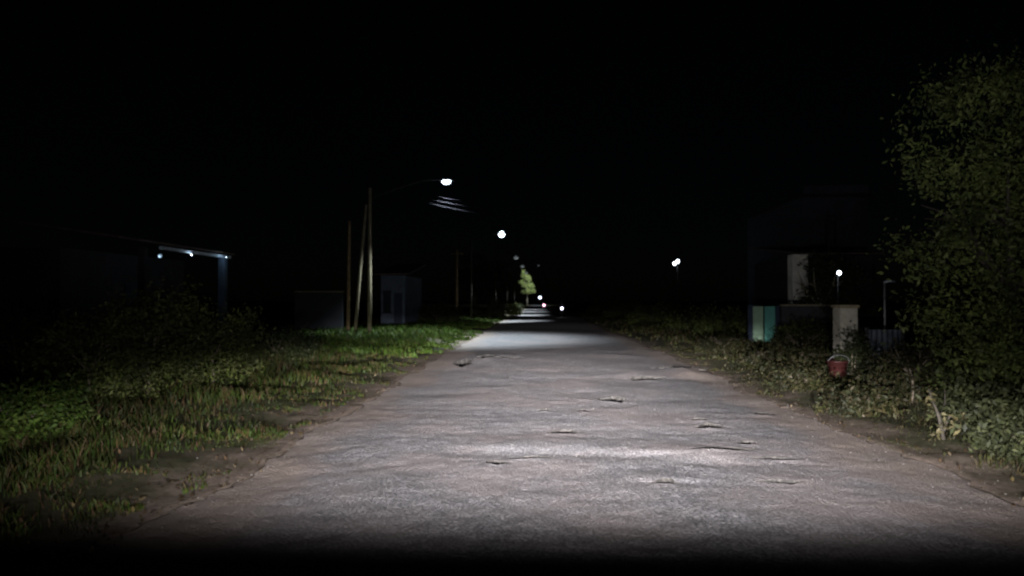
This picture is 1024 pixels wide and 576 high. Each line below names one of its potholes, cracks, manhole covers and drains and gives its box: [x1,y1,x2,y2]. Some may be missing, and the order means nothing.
pothole [453,359,473,367]
